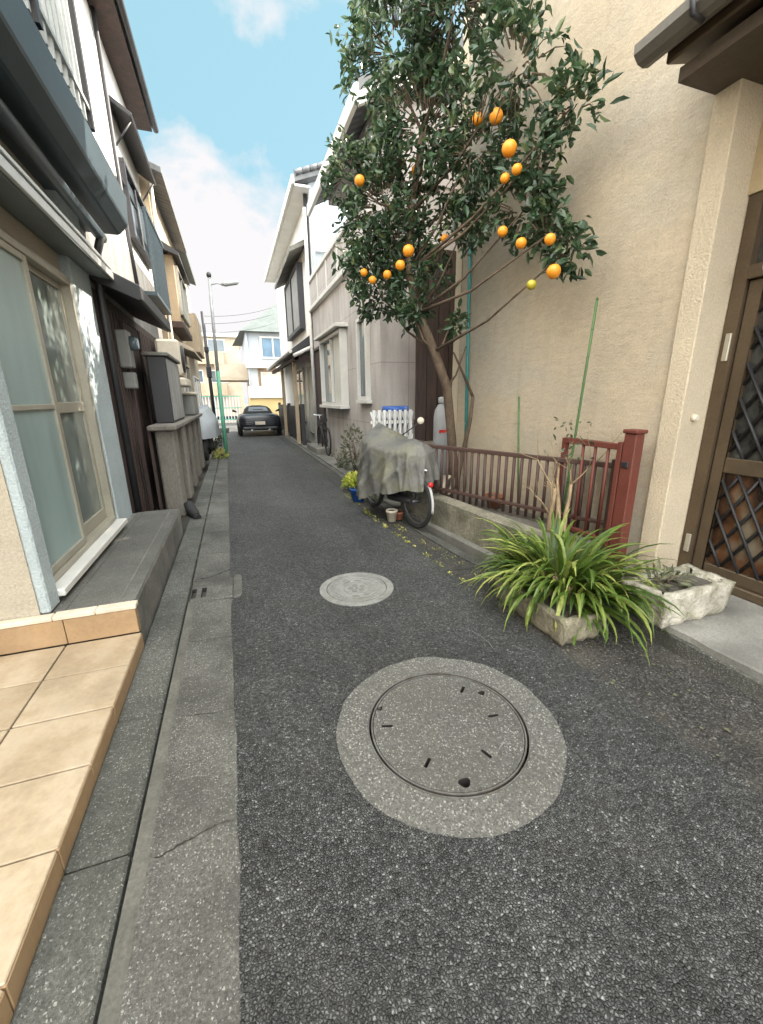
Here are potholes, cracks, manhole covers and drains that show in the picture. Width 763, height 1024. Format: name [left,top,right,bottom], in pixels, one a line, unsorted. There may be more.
crack [175,819,236,849]
manhole cover [320,572,394,606]
manhole cover [336,657,567,838]
